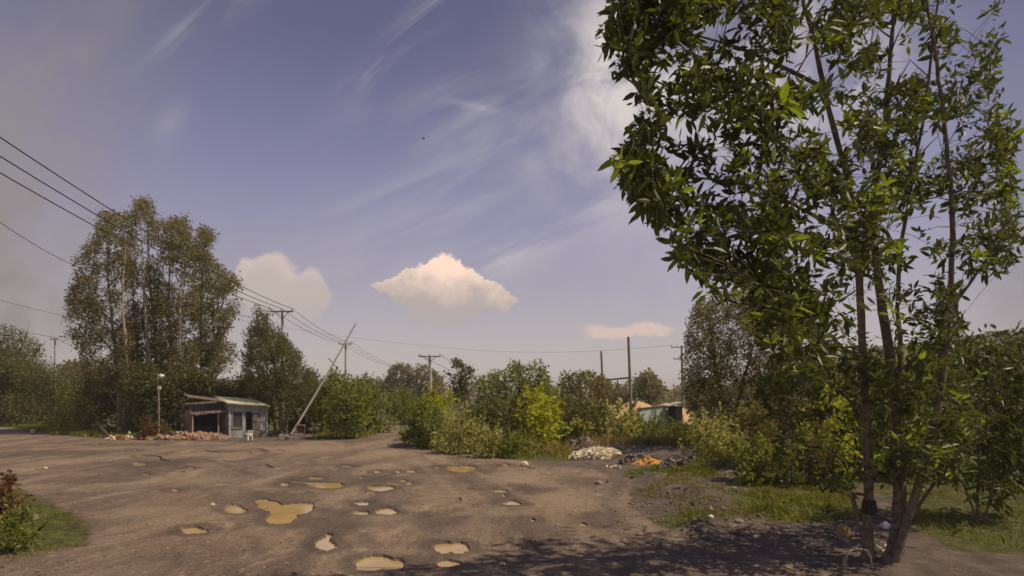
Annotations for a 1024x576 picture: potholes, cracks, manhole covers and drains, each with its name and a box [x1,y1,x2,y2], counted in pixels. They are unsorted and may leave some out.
pothole [180,525,210,534]
pothole [313,532,339,551]
pothole [373,506,399,515]
pothole [223,503,249,513]
pothole [445,465,477,473]
pothole [291,480,345,488]
pothole [255,498,315,524]
crack [152,448,286,472]
pothole [352,554,406,570]
pothole [435,558,463,567]
pothole [431,541,470,554]
